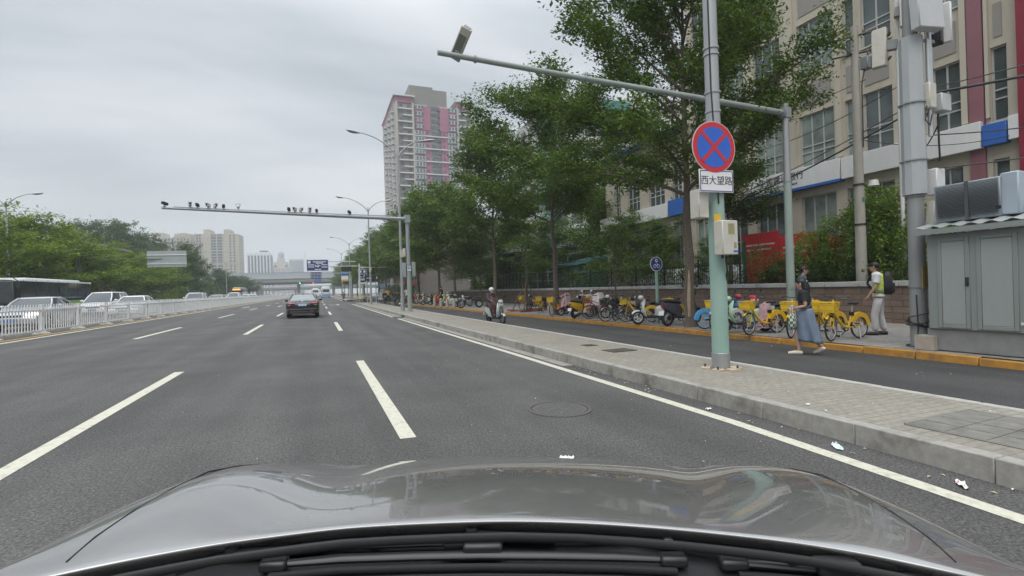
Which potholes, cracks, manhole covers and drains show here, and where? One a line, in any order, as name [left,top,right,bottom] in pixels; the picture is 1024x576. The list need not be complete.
manhole cover [528,401,592,417]
